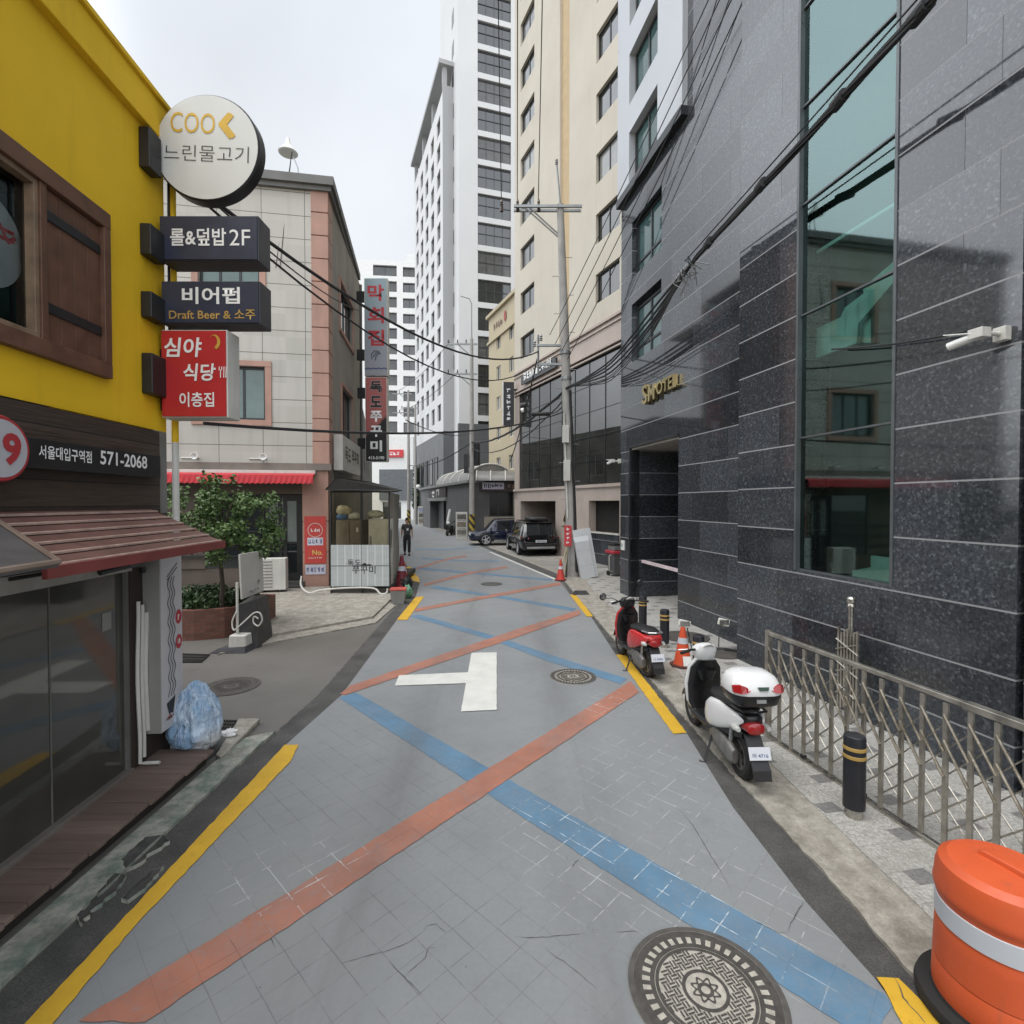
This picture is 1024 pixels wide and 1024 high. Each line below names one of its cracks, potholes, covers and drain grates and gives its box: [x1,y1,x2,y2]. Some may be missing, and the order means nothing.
drain grate [182,653,210,663]
manhole cover [550,669,596,685]
manhole cover [628,927,792,1024]
manhole cover [207,677,261,696]
pothole [121,835,169,868]
crack [343,924,443,990]
drain grate [221,720,237,731]
pothole [77,873,126,923]
pothole [122,867,162,900]
